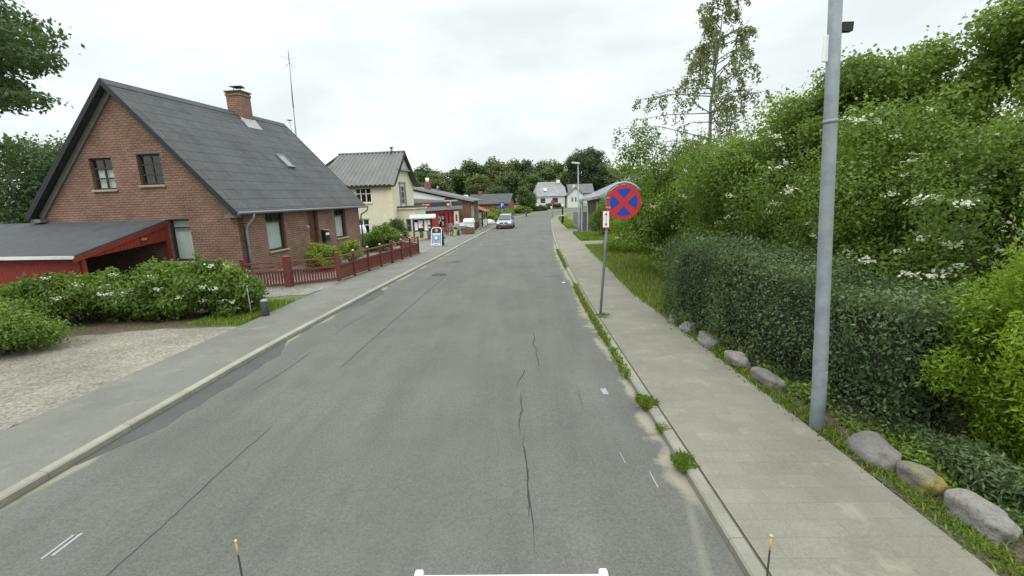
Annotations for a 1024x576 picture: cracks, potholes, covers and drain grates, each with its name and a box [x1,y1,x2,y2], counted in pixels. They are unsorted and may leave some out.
crack [517,334,539,531]
